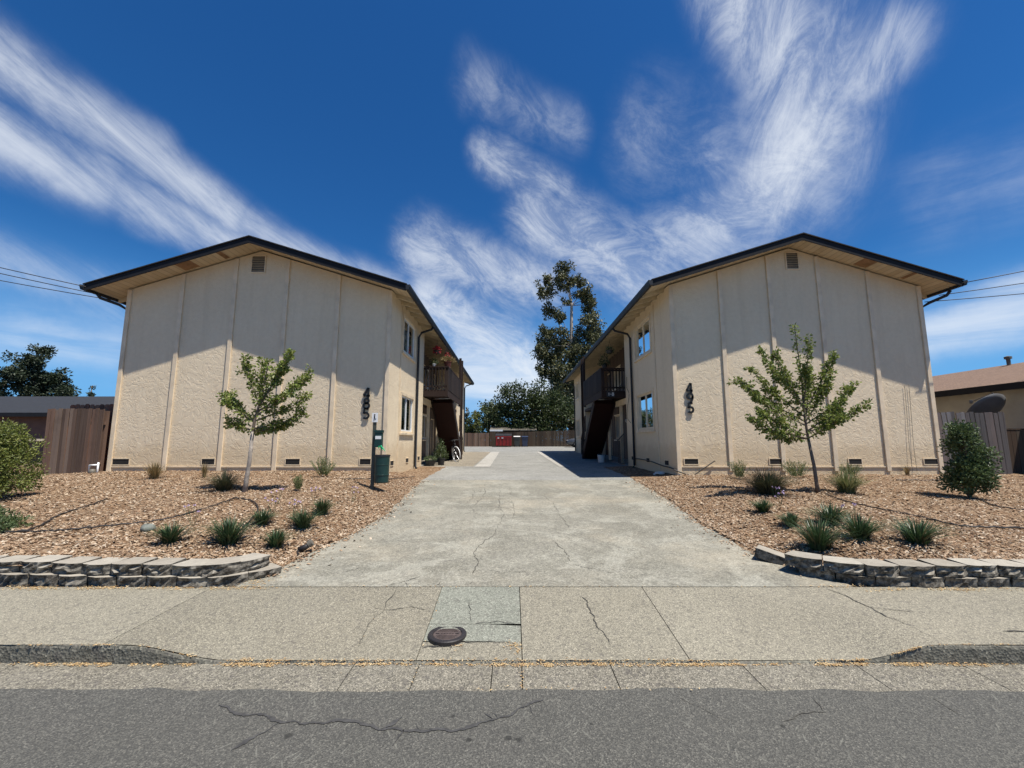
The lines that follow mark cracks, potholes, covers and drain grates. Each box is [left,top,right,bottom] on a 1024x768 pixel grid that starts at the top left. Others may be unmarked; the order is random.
crack [220,699,544,750]
crack [455,489,526,574]
manhole cover [428,627,467,647]
crack [358,576,441,647]
crack [829,589,938,640]
